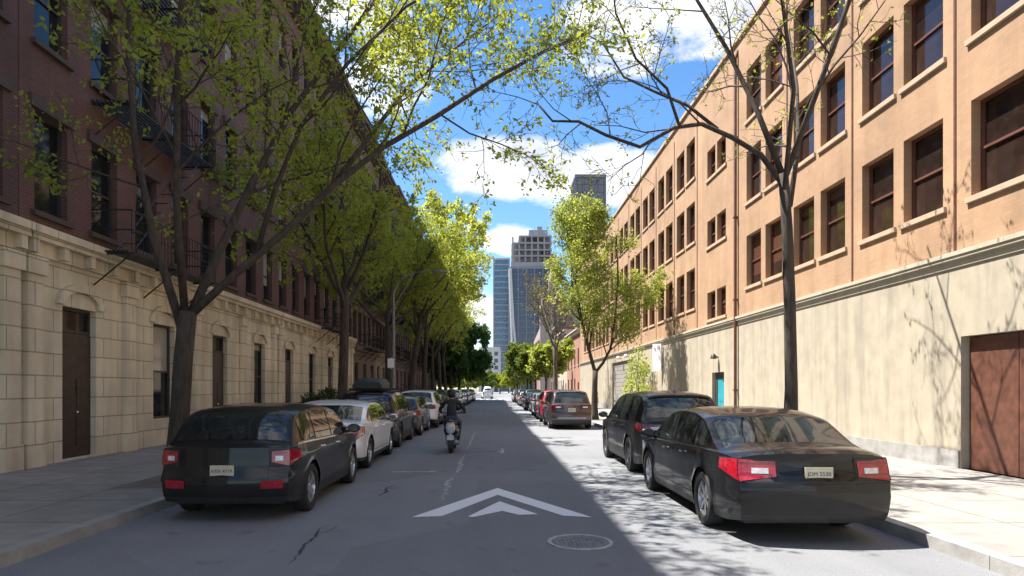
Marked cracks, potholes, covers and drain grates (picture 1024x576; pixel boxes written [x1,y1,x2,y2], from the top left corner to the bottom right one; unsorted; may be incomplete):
crack [291,527,336,562]
manhole cover [547,534,614,550]
